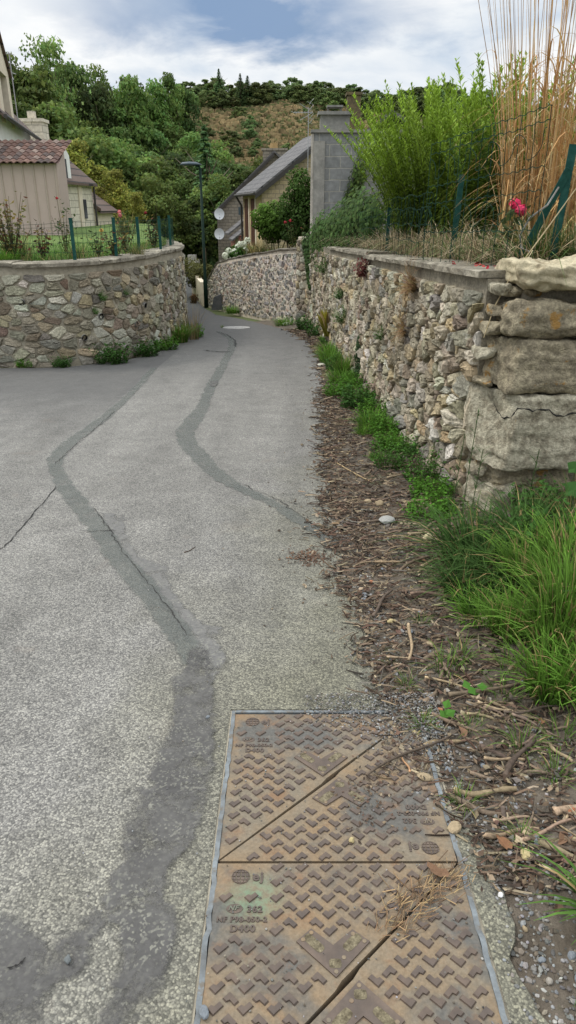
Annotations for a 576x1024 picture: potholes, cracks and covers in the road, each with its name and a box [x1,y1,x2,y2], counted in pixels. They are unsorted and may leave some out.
manhole cover [219,713,457,865]
manhole cover [200,862,502,1024]
crack [0,486,56,549]
